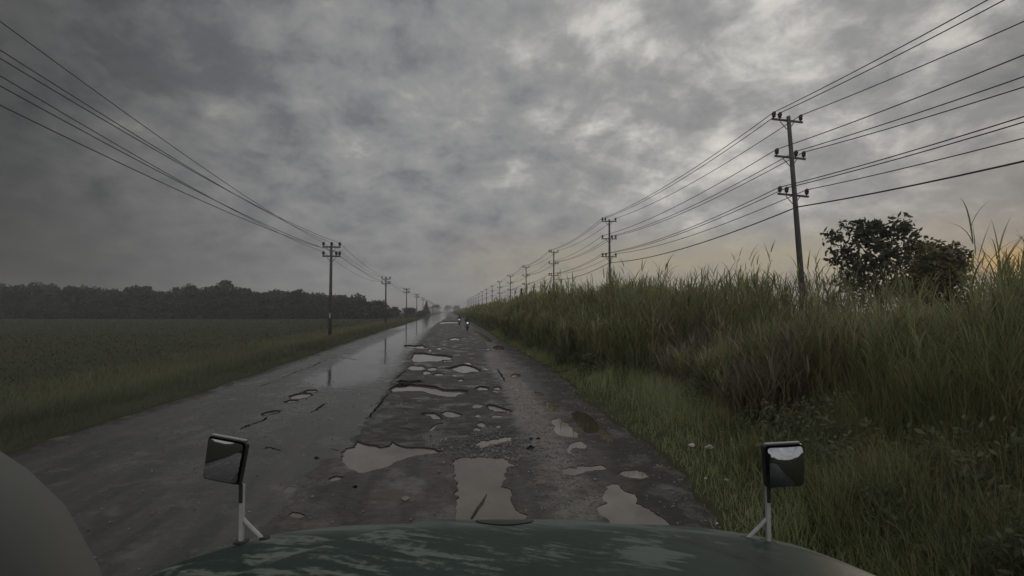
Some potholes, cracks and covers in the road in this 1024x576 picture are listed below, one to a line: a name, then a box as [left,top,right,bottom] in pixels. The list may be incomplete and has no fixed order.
pothole [388,383,469,397]
pothole [340,441,442,473]
crack [366,370,439,430]
pothole [411,353,453,362]
pothole [446,364,481,374]
